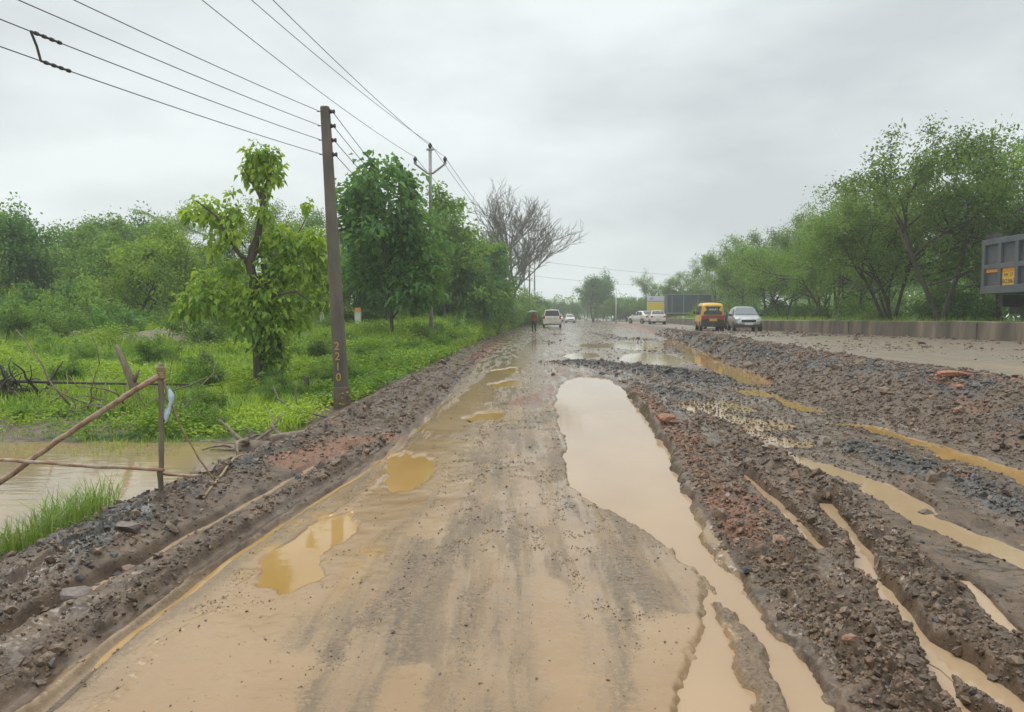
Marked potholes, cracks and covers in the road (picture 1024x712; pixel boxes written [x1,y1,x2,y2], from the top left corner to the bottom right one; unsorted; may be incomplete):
pothole [379,449,438,494]
pothole [486,379,523,388]
pothole [459,410,509,423]
pothole [549,375,857,712]
pothole [246,509,364,600]
